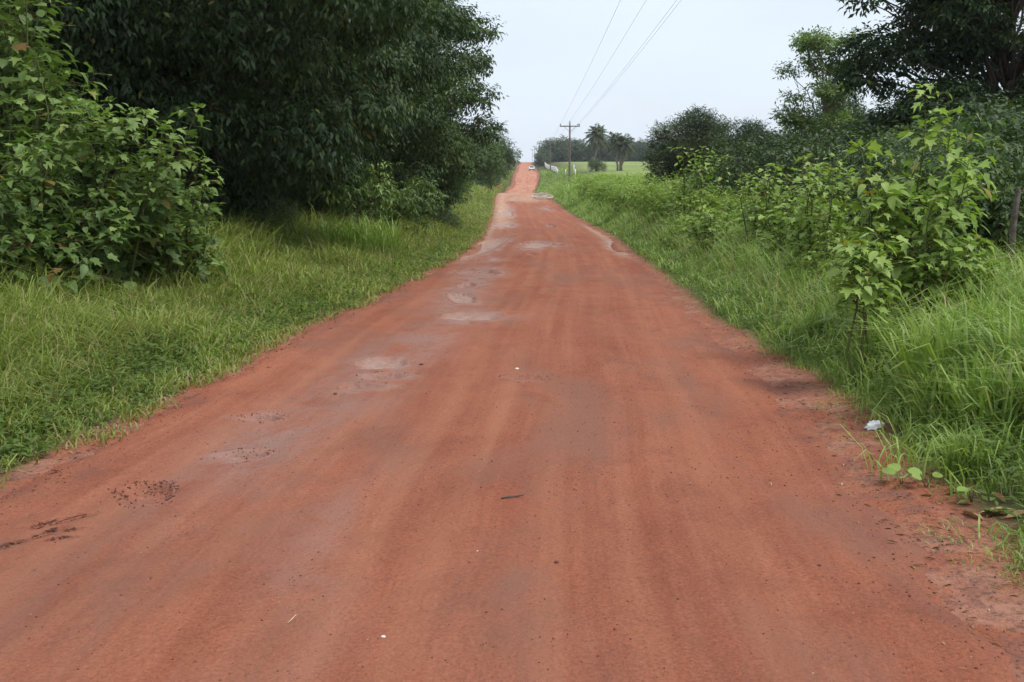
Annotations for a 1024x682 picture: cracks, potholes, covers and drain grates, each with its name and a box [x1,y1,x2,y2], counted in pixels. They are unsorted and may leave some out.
pothole [499,371,551,384]
pothole [518,241,560,250]
pothole [108,480,180,508]
pothole [350,354,414,370]
pothole [435,312,508,321]
pothole [445,292,479,305]
pothole [227,410,288,423]
pothole [196,447,275,465]
